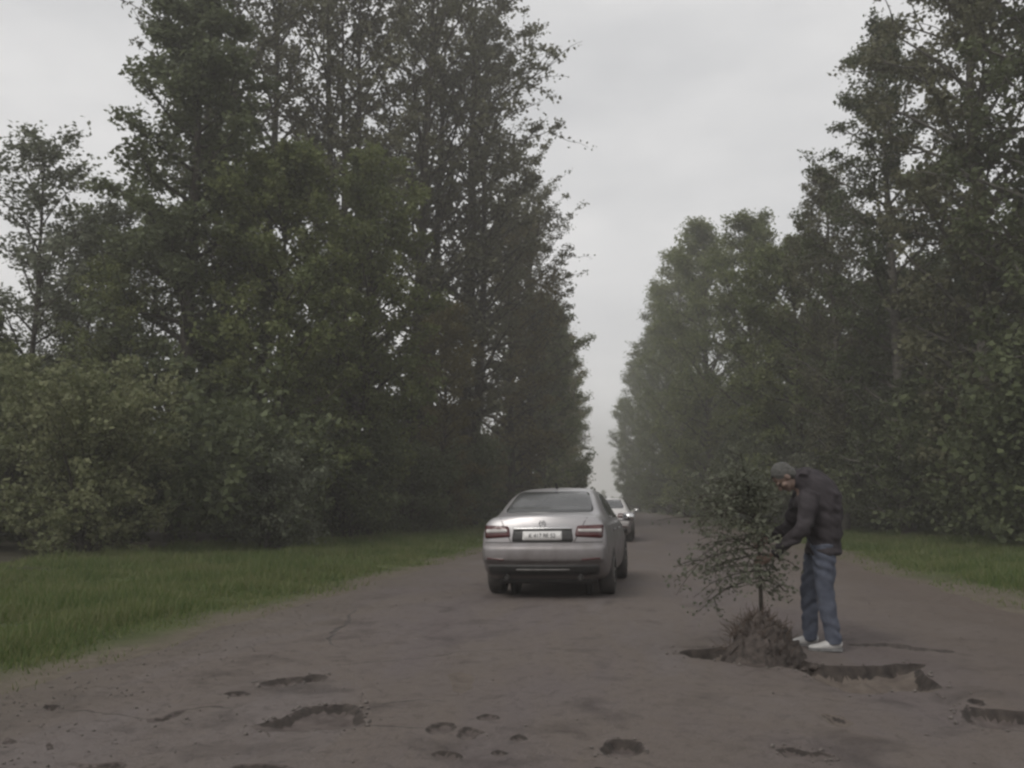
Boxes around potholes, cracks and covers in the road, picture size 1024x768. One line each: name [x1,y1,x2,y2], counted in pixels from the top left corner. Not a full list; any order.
pothole [259,674,330,688]
pothole [679,647,942,694]
pothole [509,734,528,743]
crack [325,608,500,666]
pothole [431,750,463,761]
pothole [456,727,485,740]
pothole [959,706,1024,732]
pothole [600,739,646,758]
pothole [425,722,457,735]
pothole [250,703,366,732]
